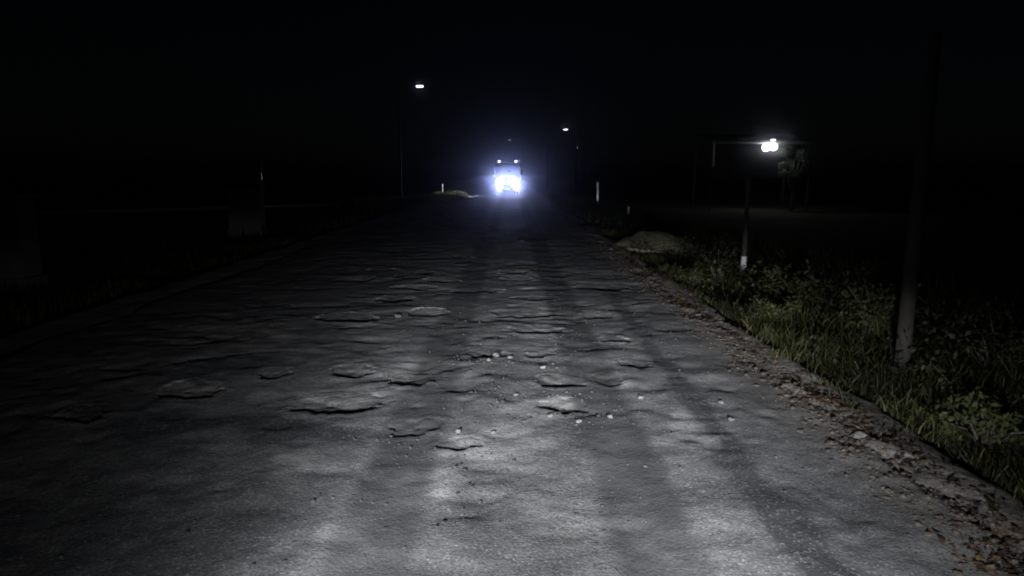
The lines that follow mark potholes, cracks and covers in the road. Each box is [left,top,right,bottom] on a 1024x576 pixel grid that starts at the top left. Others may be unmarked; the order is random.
pothole [500,322,575,335]
pothole [607,355,661,370]
pothole [276,390,397,418]
pothole [305,310,390,324]
pothole [33,401,126,427]
pothole [419,433,496,458]
pothole [320,361,387,382]
pothole [525,372,597,391]
pothole [376,414,456,442]
pothole [144,376,236,402]
pothole [401,307,458,318]
pothole [582,369,632,390]
